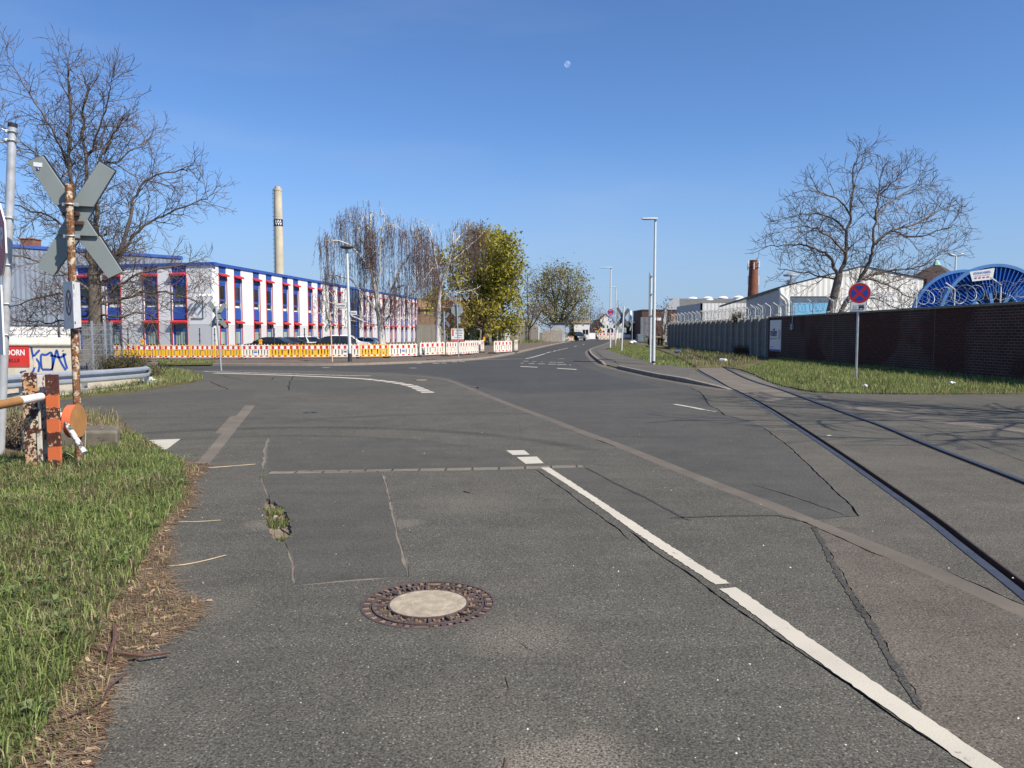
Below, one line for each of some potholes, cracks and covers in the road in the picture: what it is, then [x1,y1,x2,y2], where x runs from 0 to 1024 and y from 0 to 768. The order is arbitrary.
manhole cover [360,581,495,629]
pothole [263,498,292,540]
